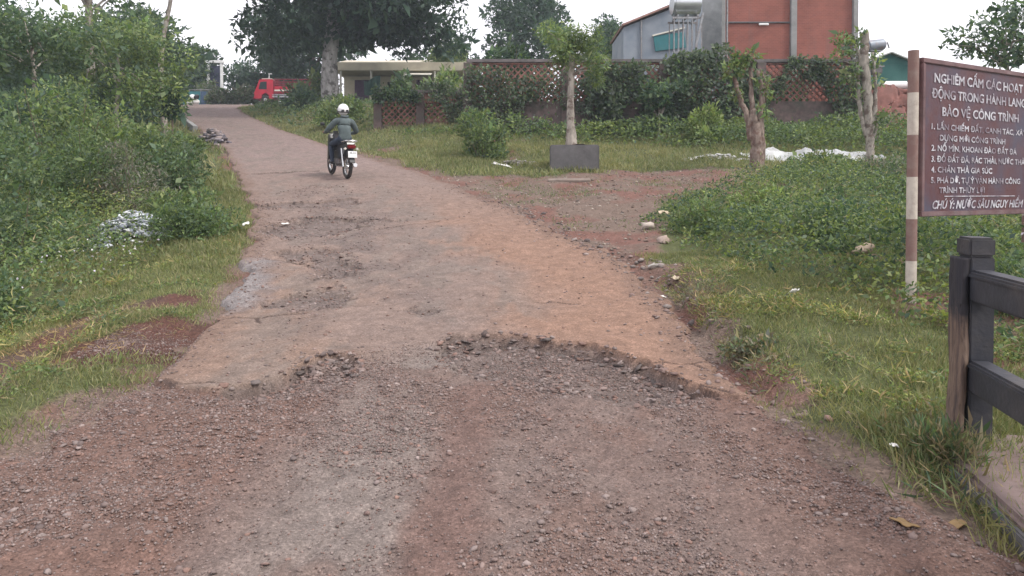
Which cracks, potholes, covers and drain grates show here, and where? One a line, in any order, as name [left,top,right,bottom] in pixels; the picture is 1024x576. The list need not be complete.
pothole [428,330,703,410]
pothole [274,246,371,281]
pothole [396,305,452,317]
pothole [248,215,409,240]
pothole [258,282,359,314]
